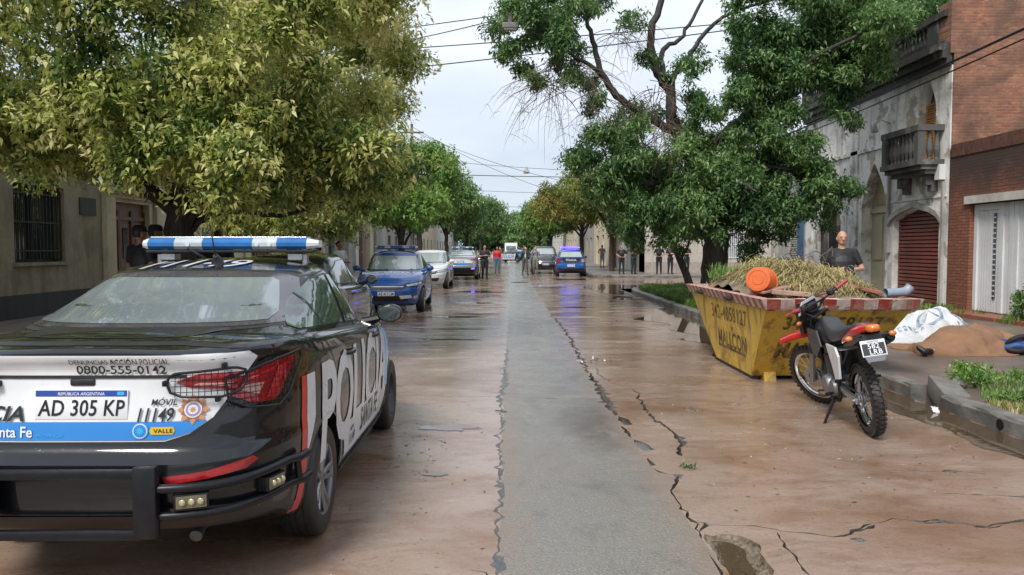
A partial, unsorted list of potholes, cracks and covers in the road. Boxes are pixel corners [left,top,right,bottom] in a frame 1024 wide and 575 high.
crack [396,349,571,575]
crack [551,315,1024,575]
pothole [703,534,774,575]
